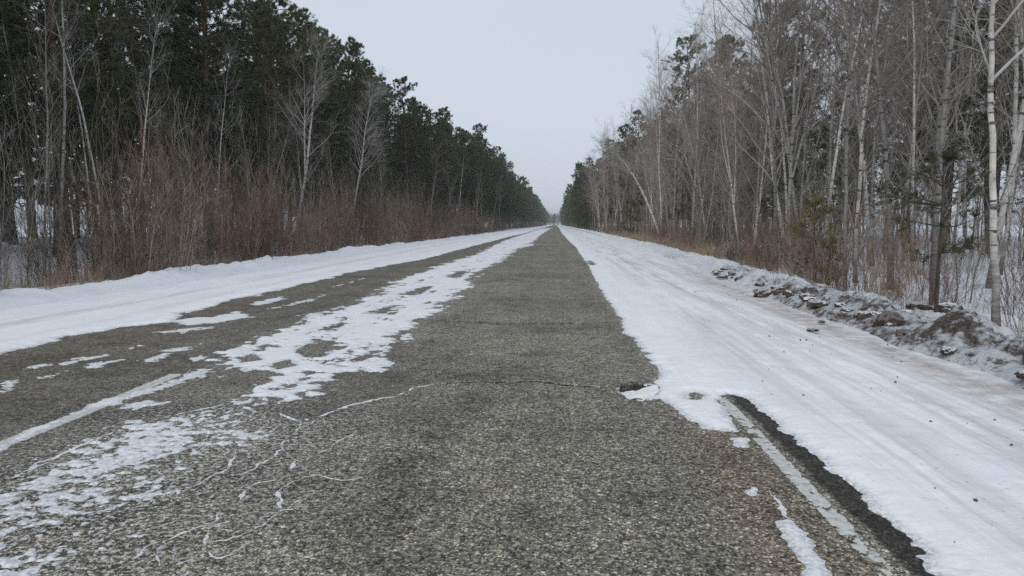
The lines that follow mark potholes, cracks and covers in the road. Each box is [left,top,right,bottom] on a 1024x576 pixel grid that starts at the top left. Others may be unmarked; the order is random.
crack [427,319,622,345]
crack [3,379,615,569]
pothole [604,381,662,405]
